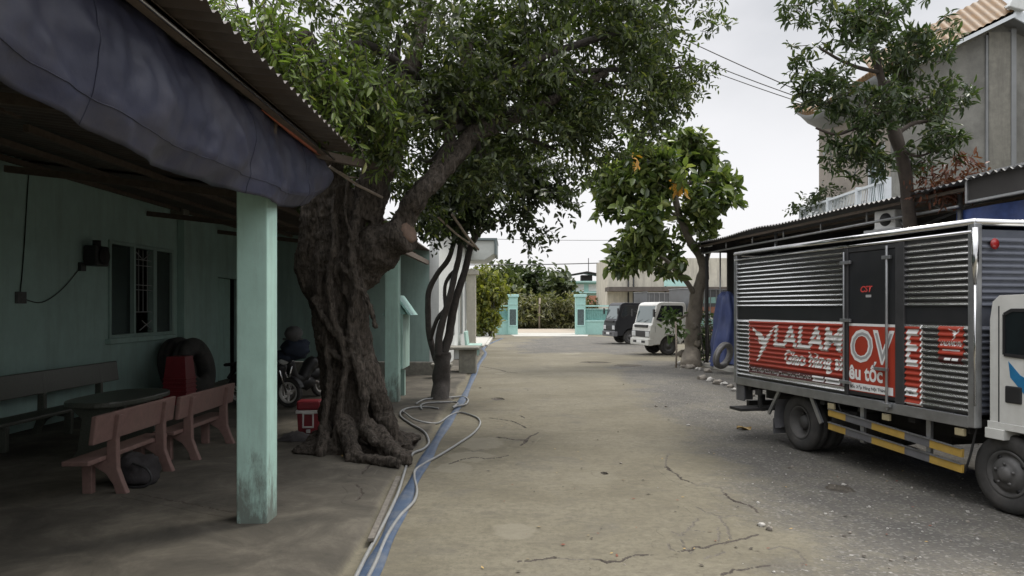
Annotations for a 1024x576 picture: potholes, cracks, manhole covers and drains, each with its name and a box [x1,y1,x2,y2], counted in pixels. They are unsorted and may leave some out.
crack [341,463,382,505]
crack [500,452,824,576]
crack [437,414,548,467]
